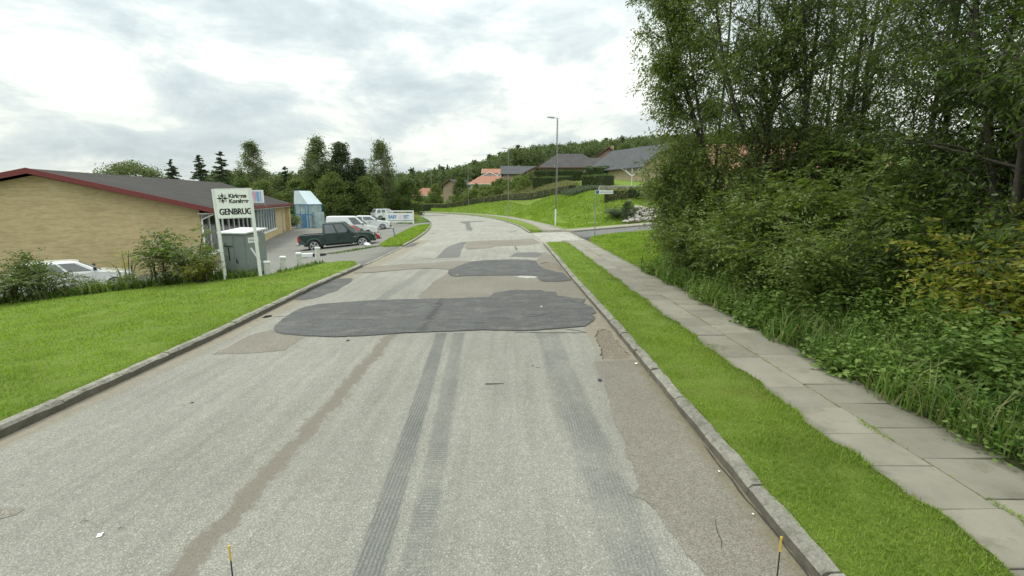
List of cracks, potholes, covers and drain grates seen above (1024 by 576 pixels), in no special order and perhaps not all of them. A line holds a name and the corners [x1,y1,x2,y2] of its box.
crack [704,446,809,576]
pothole [594,329,630,359]
